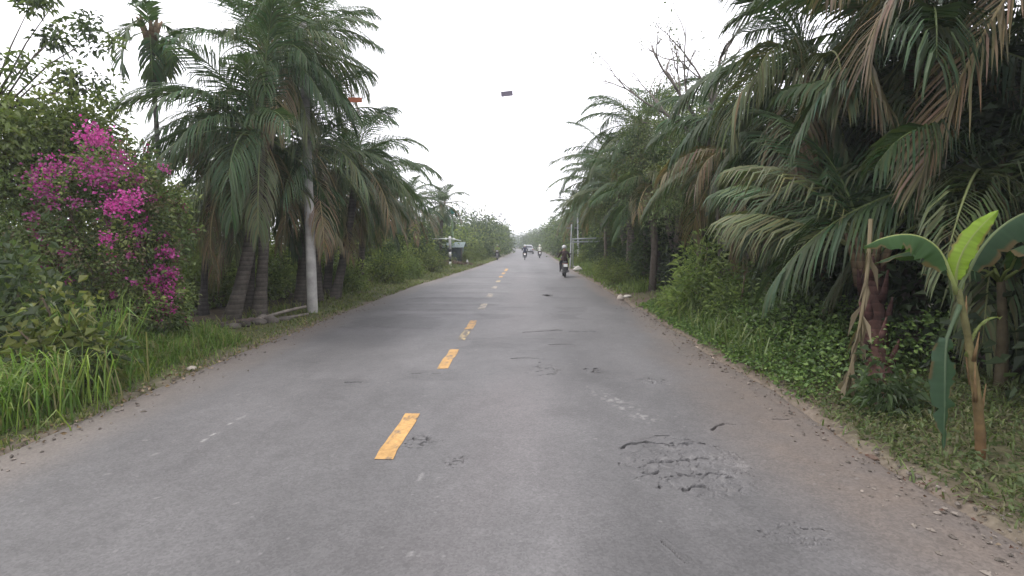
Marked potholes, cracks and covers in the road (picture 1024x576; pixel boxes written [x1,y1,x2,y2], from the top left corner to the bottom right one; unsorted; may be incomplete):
crack [506,329,602,378]
crack [651,536,696,569]
crack [611,417,841,553]
